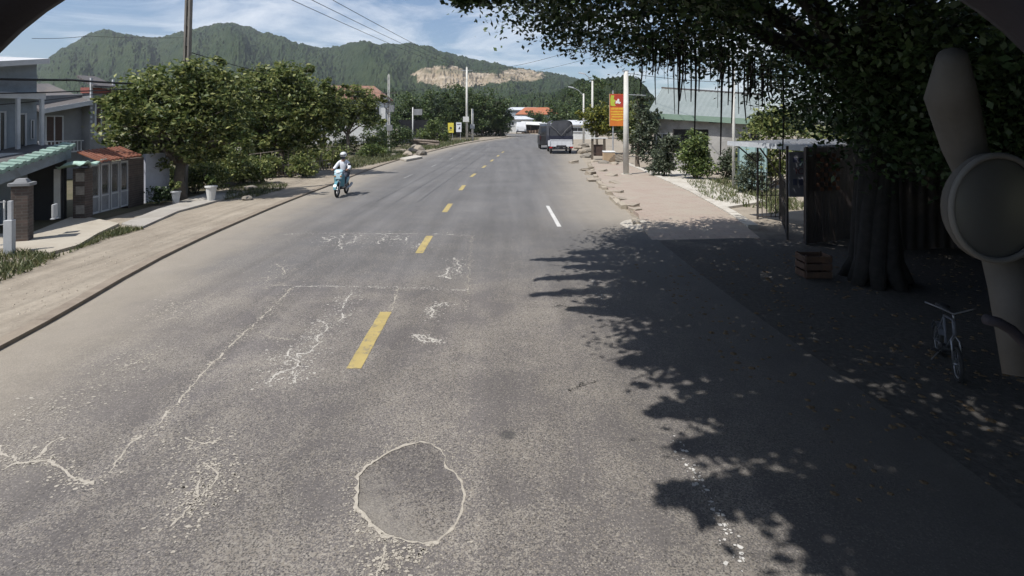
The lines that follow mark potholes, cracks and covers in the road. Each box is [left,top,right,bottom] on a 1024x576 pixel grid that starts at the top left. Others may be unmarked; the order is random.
crack [310,231,425,253]
crack [0,261,363,556]
crack [412,237,473,345]
